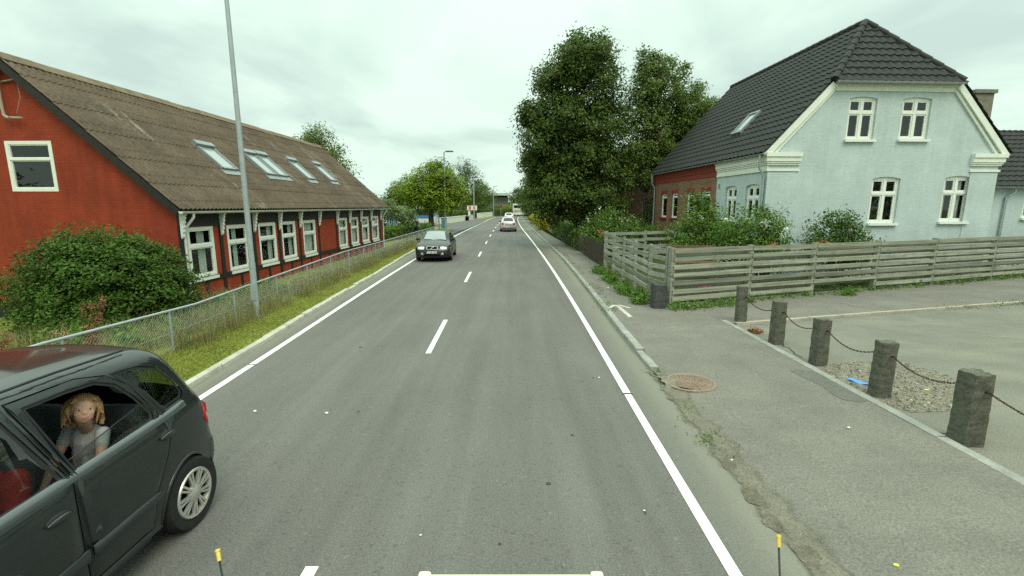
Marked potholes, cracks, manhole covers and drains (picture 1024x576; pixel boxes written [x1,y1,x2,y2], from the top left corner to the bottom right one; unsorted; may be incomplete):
manhole cover [667,373,717,393]
